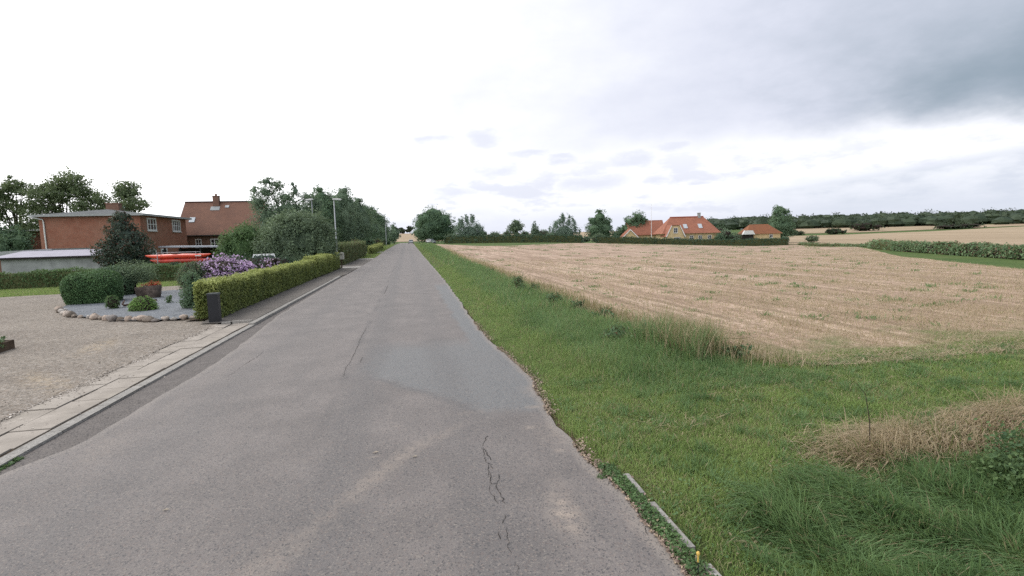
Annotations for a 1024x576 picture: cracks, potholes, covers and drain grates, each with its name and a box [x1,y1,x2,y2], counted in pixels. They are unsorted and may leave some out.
crack [482,437,518,572]
